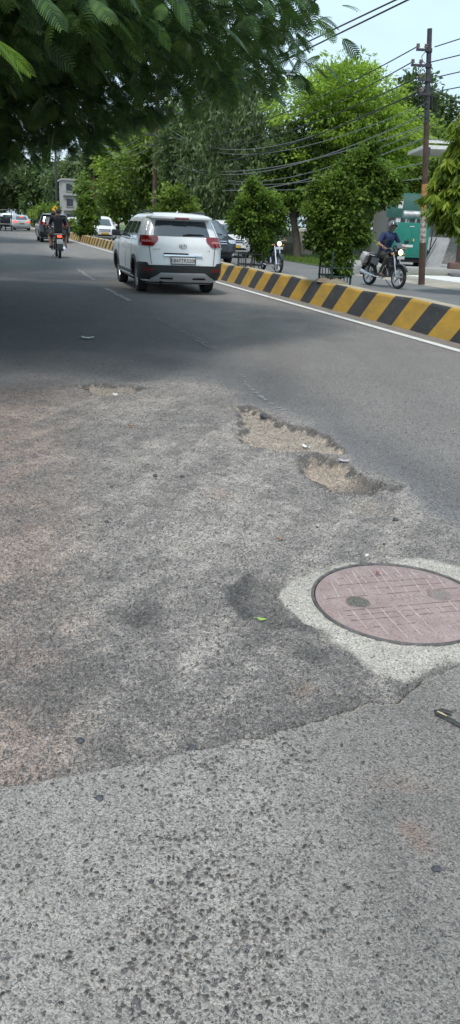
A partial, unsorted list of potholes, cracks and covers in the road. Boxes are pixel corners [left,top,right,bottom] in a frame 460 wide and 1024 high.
manhole cover [277,557,460,684]
pothole [74,383,154,396]
pothole [297,453,403,497]
pothole [232,405,345,455]
